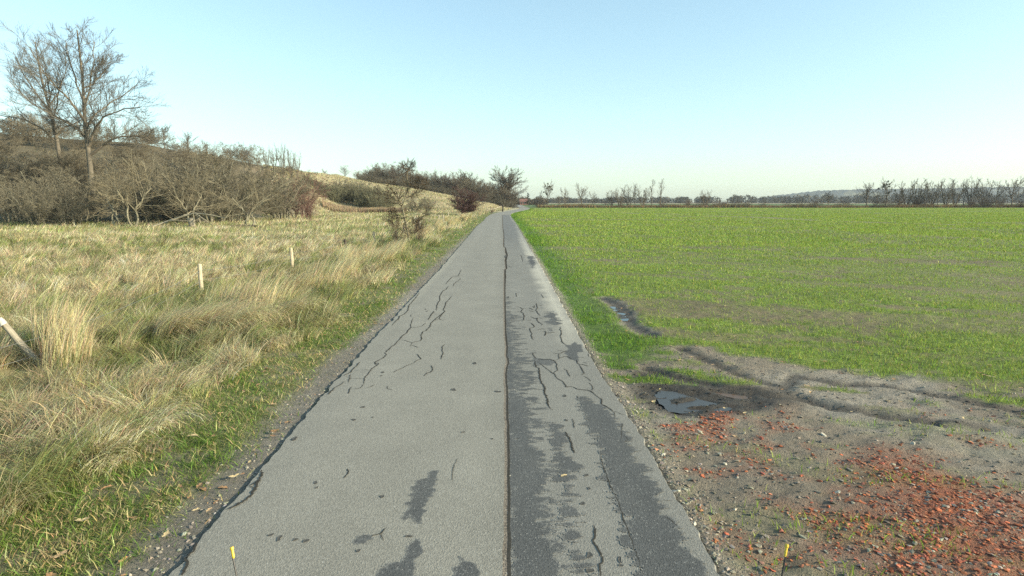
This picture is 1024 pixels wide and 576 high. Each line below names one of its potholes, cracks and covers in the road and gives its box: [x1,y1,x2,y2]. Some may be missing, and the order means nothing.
crack [516,293,628,441]
crack [228,470,264,509]
crack [328,271,461,394]
